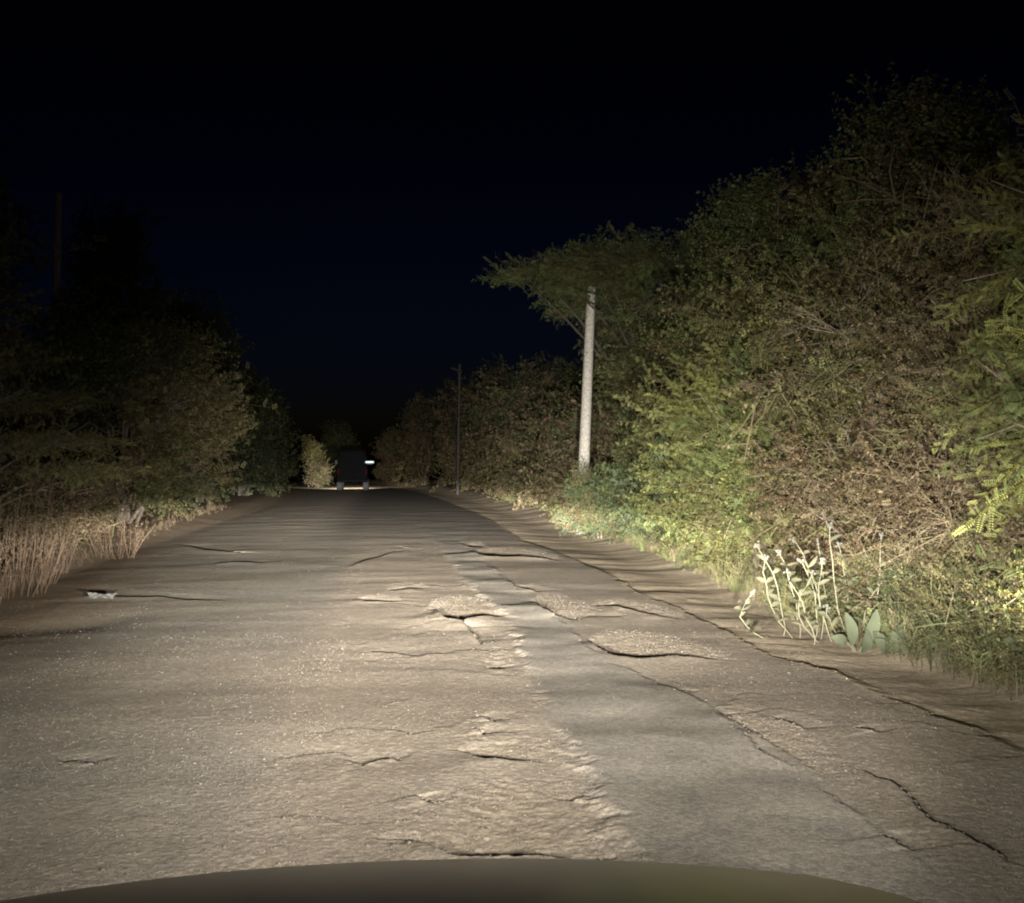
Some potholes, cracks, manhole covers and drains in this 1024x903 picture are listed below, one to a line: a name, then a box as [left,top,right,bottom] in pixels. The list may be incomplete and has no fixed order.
crack [850,724,892,732]
crack [510,583,544,592]
crack [477,713,505,735]
crack [169,544,273,564]
crack [773,713,829,730]
pothole [424,594,514,620]
crack [358,756,408,765]
crack [337,546,415,569]
pothole [531,593,603,620]
crack [73,587,242,600]
pothole [587,628,741,661]
